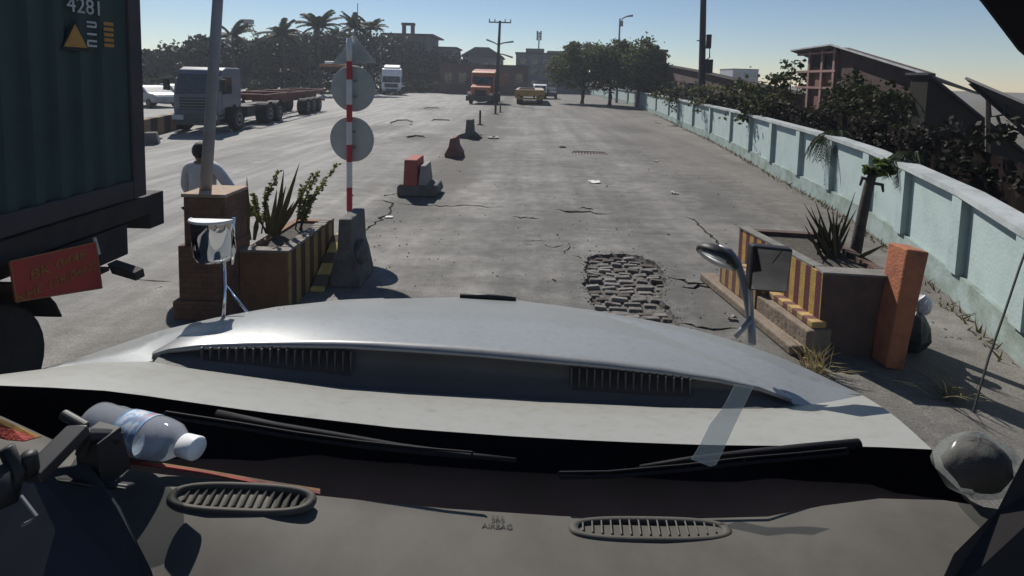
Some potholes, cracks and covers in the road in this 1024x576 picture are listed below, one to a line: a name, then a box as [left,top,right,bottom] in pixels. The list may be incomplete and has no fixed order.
crack [678,216,719,245]
crack [366,194,487,230]
crack [670,277,710,289]
pothole [582,254,679,326]
